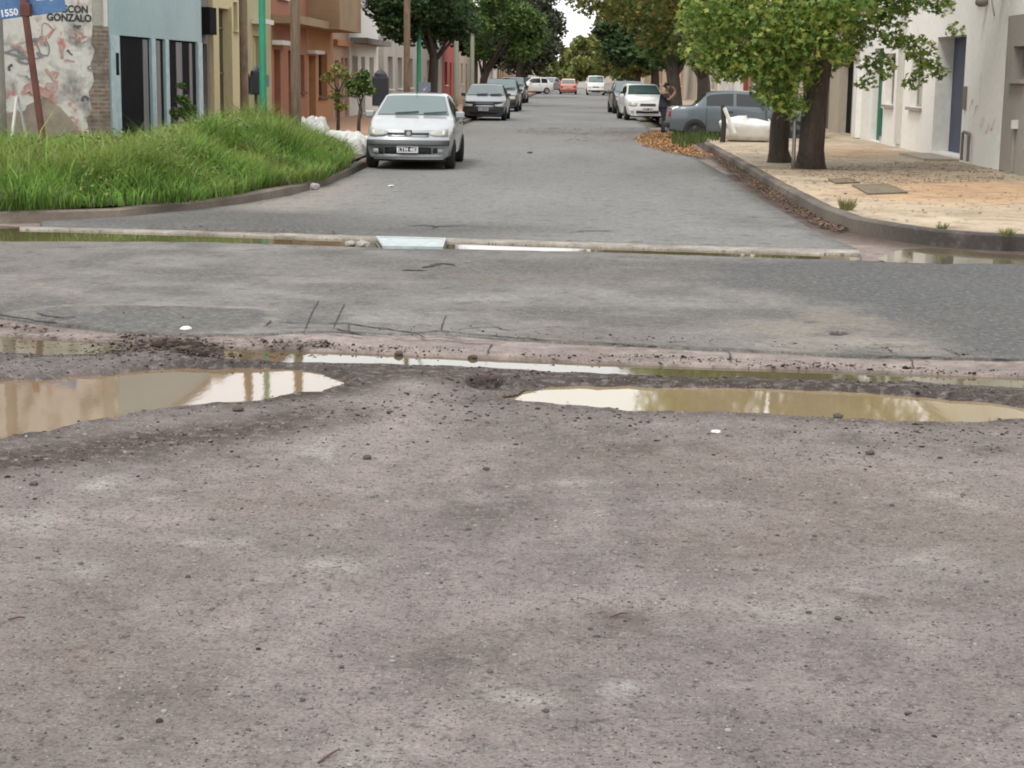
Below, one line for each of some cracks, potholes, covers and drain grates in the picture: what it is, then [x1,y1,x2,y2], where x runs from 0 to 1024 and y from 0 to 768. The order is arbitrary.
manhole cover [852,183,908,195]
pothole [0,359,362,442]
pothole [459,375,525,397]
crack [405,263,455,271]
pothole [487,377,1024,425]
crack [265,300,546,342]
